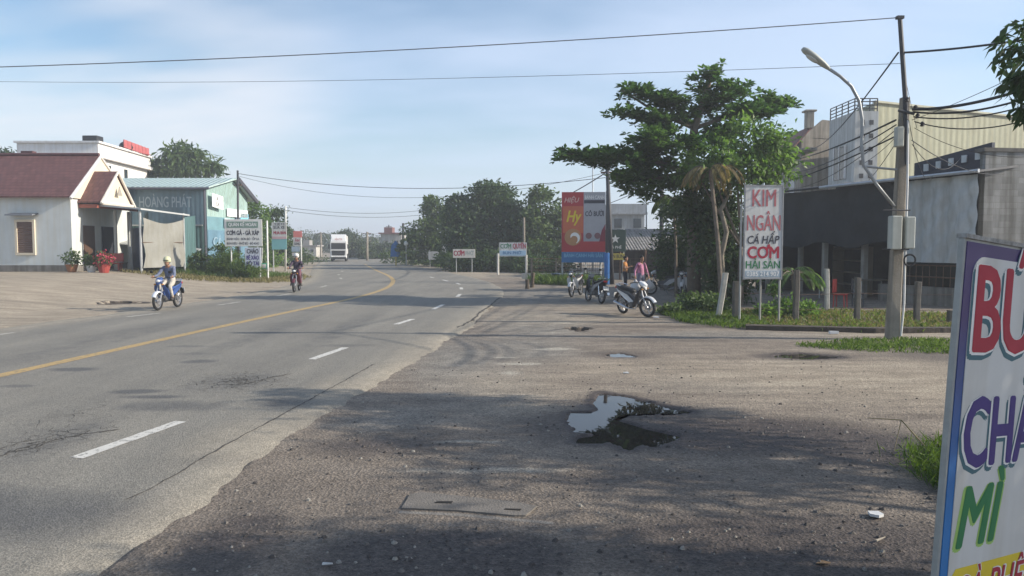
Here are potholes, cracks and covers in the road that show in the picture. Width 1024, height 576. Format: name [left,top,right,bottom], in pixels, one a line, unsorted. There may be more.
crack [0,399,129,463]
crack [170,369,289,394]
